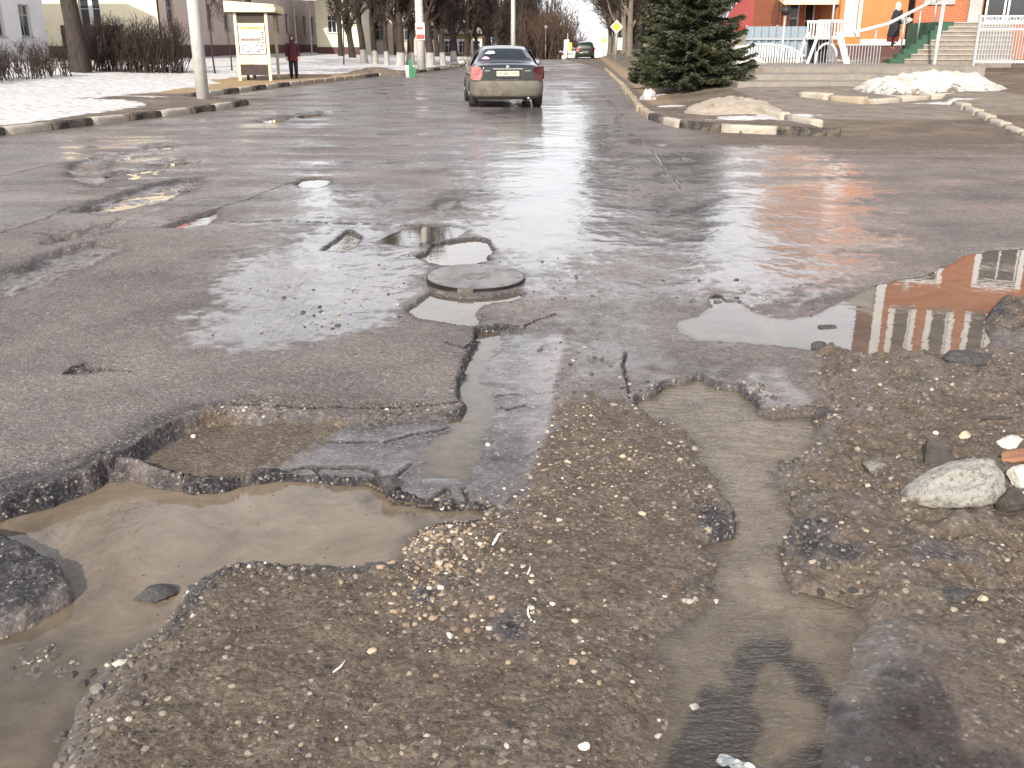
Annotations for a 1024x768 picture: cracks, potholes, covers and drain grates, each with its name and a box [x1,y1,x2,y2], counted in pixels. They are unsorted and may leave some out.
pothole [57,157,121,189]
pothole [54,360,117,377]
pothole [397,287,531,328]
pothole [65,176,212,215]
crack [617,351,636,401]
crack [0,205,125,243]
pothole [152,208,225,229]
pothole [624,371,886,768]
pothole [316,228,367,253]
crack [595,93,686,193]
manhole cover [426,264,525,293]
pothole [669,245,1024,355]
